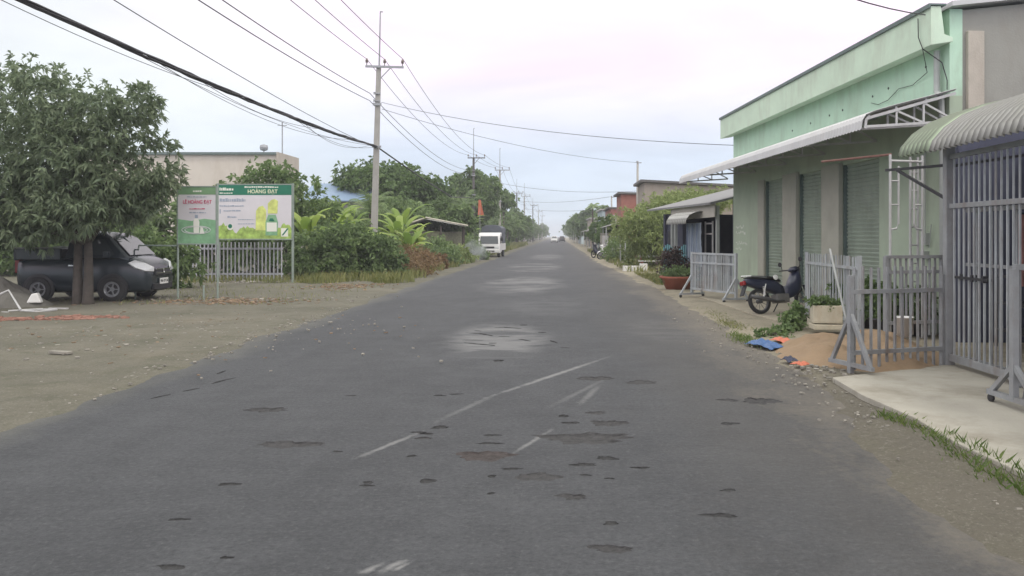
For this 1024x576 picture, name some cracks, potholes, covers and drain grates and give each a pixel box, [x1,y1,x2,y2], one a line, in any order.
pothole [456,451,520,462]
pothole [532,432,634,444]
pothole [741,397,783,405]
pothole [258,441,325,449]
pothole [587,544,633,554]
pothole [515,472,564,481]
